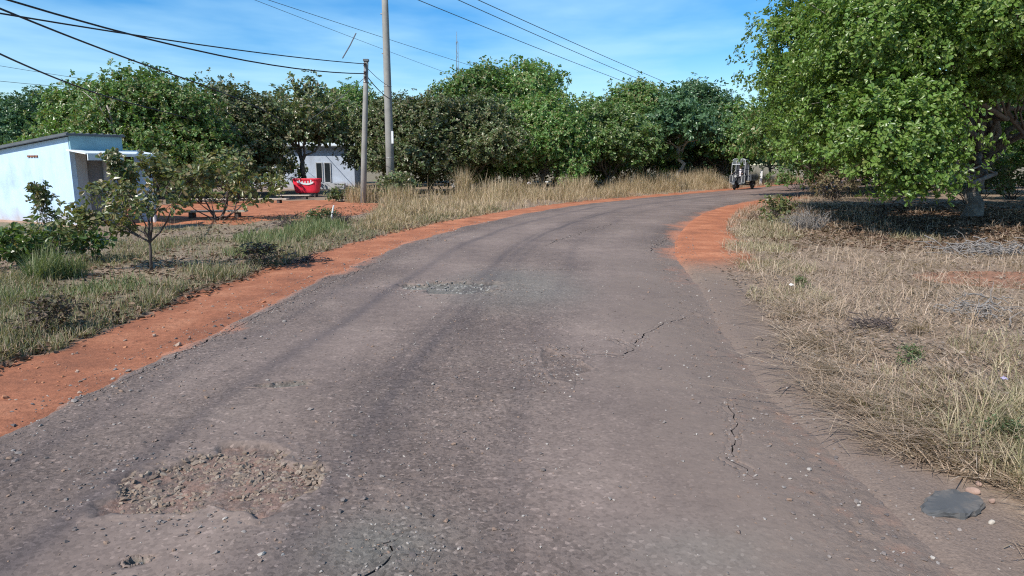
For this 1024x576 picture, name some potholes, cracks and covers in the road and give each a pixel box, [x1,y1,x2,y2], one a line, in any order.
pothole [243,379,320,389]
crack [719,399,760,480]
crack [358,530,433,576]
crack [561,316,690,358]
pothole [120,554,155,568]
pothole [378,280,519,297]
pothole [66,433,353,529]
